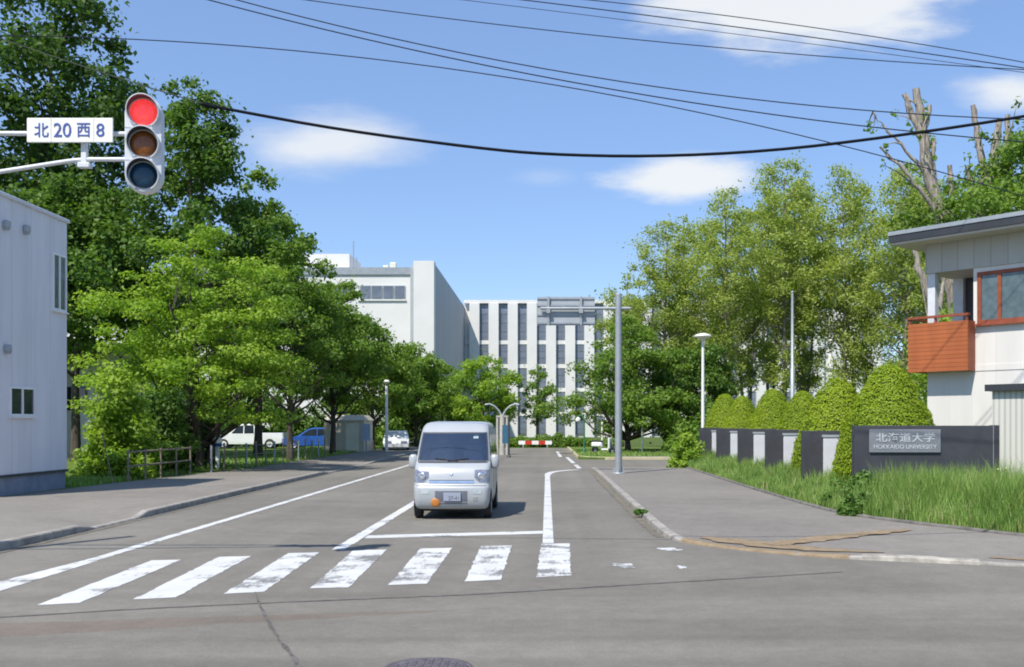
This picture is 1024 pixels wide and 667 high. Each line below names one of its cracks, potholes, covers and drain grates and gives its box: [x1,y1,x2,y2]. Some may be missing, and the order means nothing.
manhole cover [384,657,473,667]
crack [255,592,302,667]
